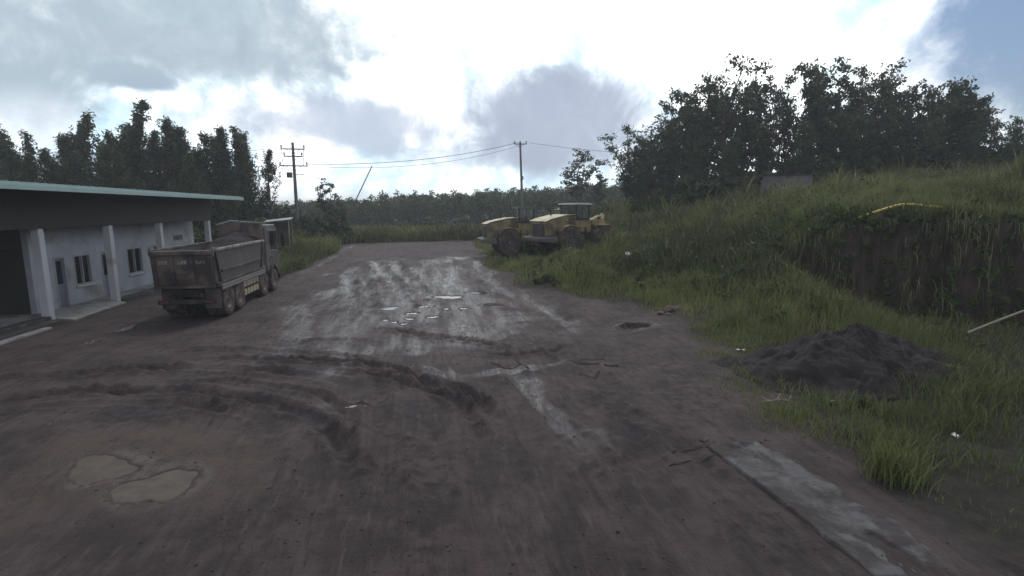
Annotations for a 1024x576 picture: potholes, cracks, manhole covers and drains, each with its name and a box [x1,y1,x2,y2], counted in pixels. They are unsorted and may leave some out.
pothole [614,322,651,331]
crack [572,358,619,379]
crack [490,355,529,369]
